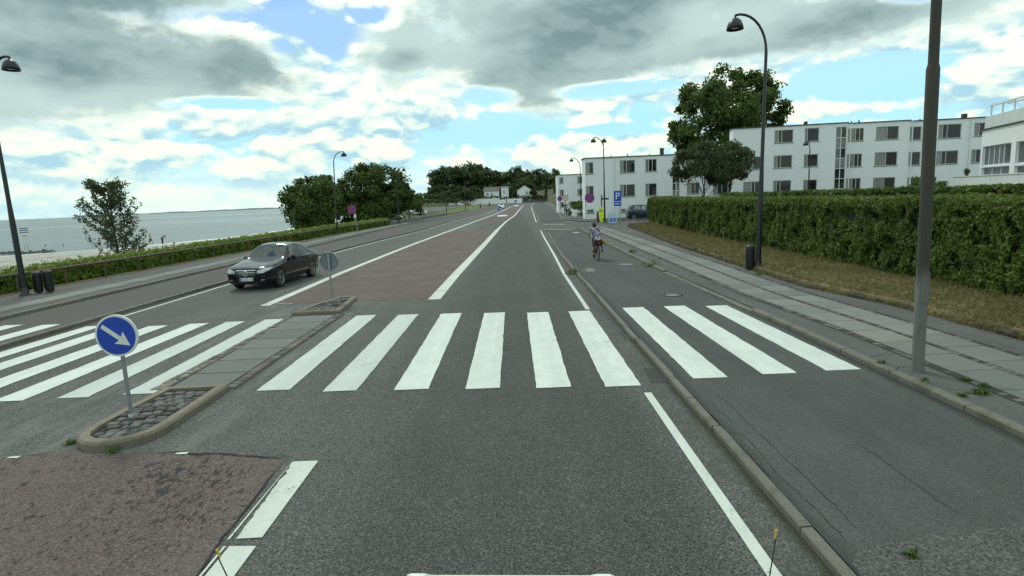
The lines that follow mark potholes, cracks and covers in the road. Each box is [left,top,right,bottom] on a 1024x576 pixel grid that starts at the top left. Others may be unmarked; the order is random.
crack [709,393,860,549]
